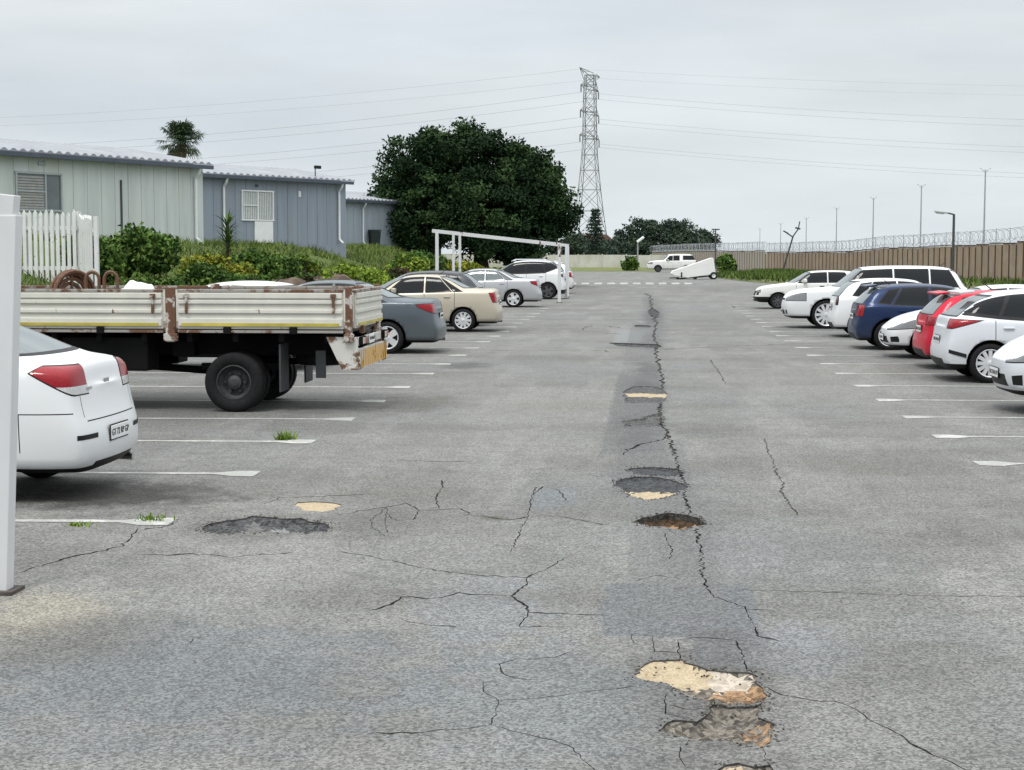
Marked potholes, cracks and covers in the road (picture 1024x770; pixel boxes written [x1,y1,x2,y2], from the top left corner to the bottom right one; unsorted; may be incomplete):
crack [376,651,634,770]
pothole [655,696,785,749]
pothole [610,475,690,500]
pothole [623,386,668,404]
crack [623,296,1022,770]
crack [19,520,291,573]
pothole [195,514,336,535]
pothole [624,466,685,477]
pothole [623,655,775,709]
crack [339,480,608,627]
pothole [631,511,712,532]
